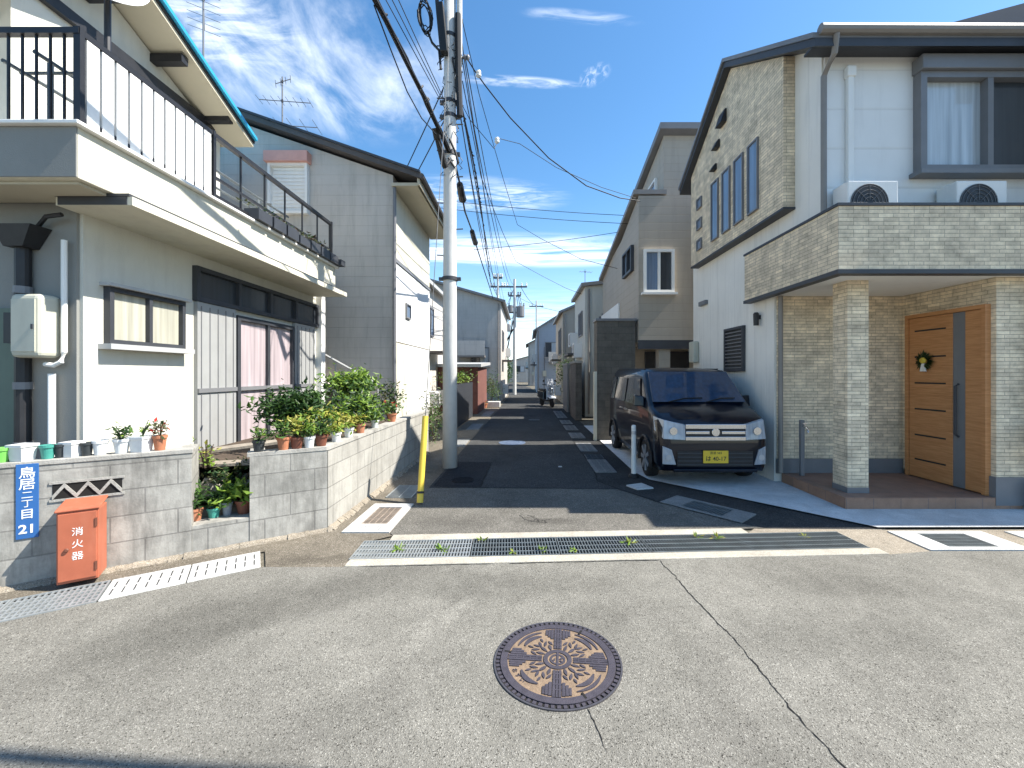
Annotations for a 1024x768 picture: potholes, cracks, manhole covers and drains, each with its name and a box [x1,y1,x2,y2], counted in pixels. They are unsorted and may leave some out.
crack [361,560,846,768]
drain grate [470,537,560,557]
drain grate [732,531,870,550]
drain grate [639,533,754,553]
drain grate [349,539,473,560]
drain grate [0,580,111,622]
manhole cover [494,622,623,712]
drain grate [920,534,998,547]
drain grate [556,535,652,555]
